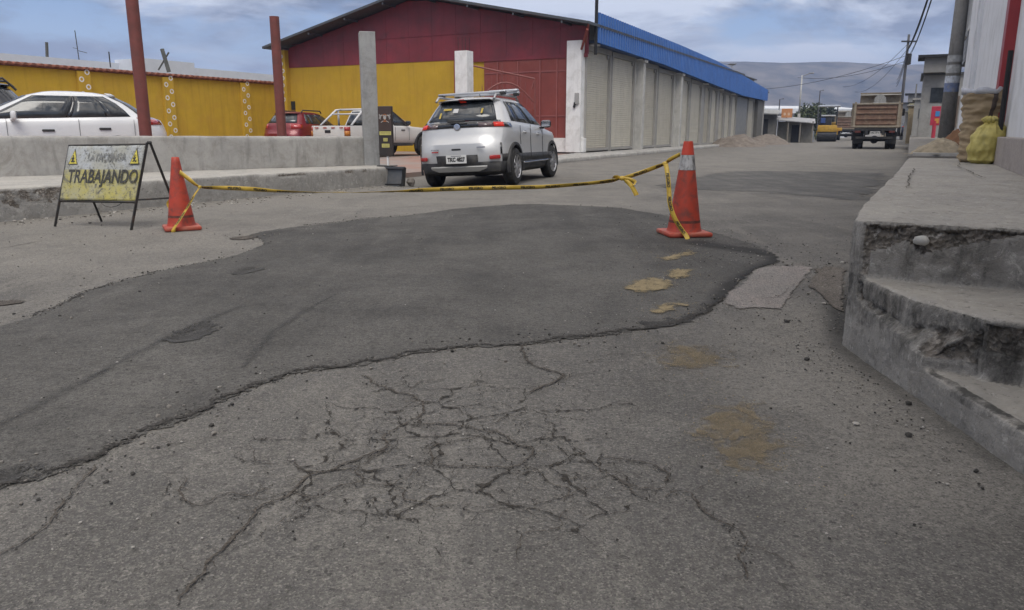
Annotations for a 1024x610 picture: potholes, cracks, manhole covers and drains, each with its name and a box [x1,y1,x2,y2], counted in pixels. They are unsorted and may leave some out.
crack [124,344,792,600]
crack [0,464,97,553]
